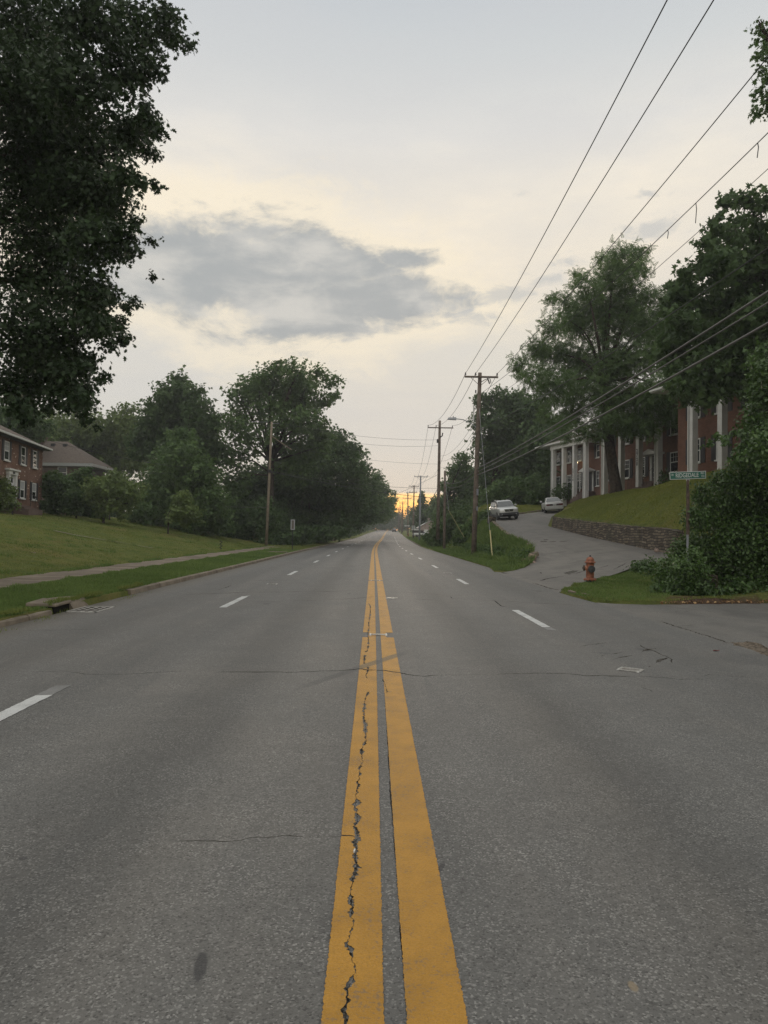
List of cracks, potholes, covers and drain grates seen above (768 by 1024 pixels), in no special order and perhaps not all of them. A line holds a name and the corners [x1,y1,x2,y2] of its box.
drain grate [26,595,116,614]
crack [2,606,739,1024]
